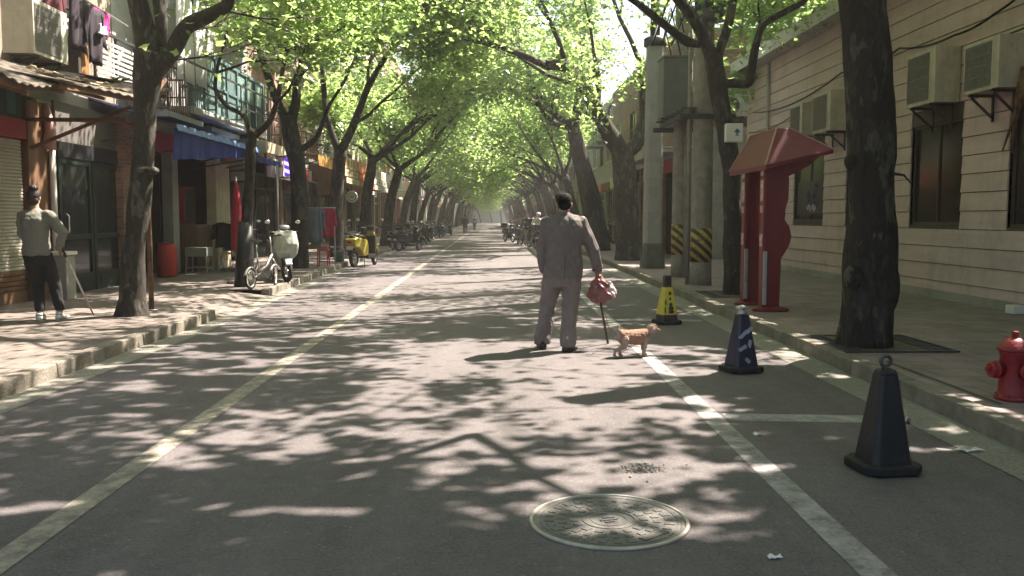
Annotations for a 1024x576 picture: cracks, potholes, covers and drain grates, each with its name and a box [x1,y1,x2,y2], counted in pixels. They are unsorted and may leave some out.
manhole cover [528,494,691,551]
pothole [613,460,688,482]
